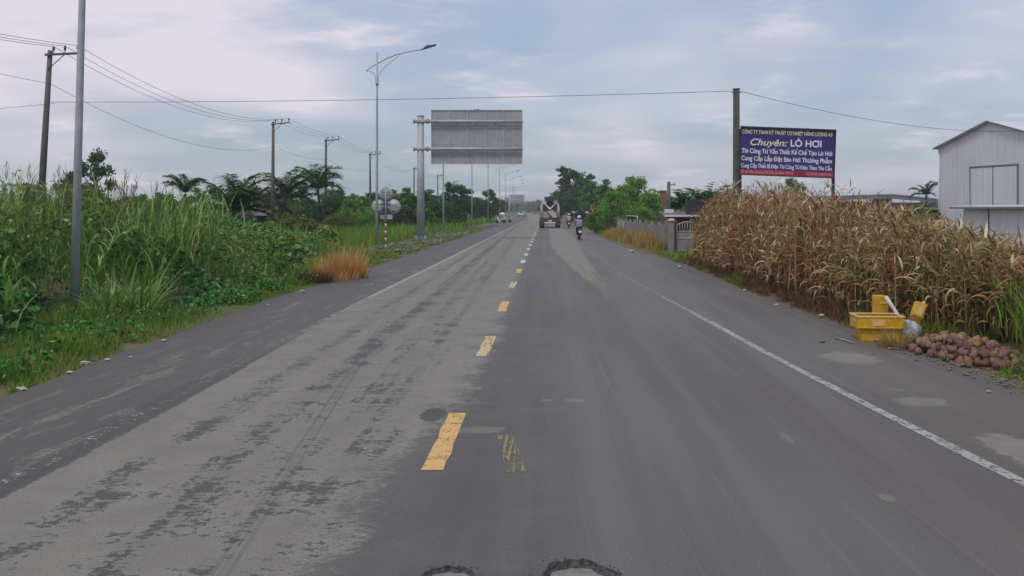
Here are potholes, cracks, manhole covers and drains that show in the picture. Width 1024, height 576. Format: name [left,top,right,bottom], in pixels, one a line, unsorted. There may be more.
pothole [529,557,622,576]
pothole [421,563,483,576]
